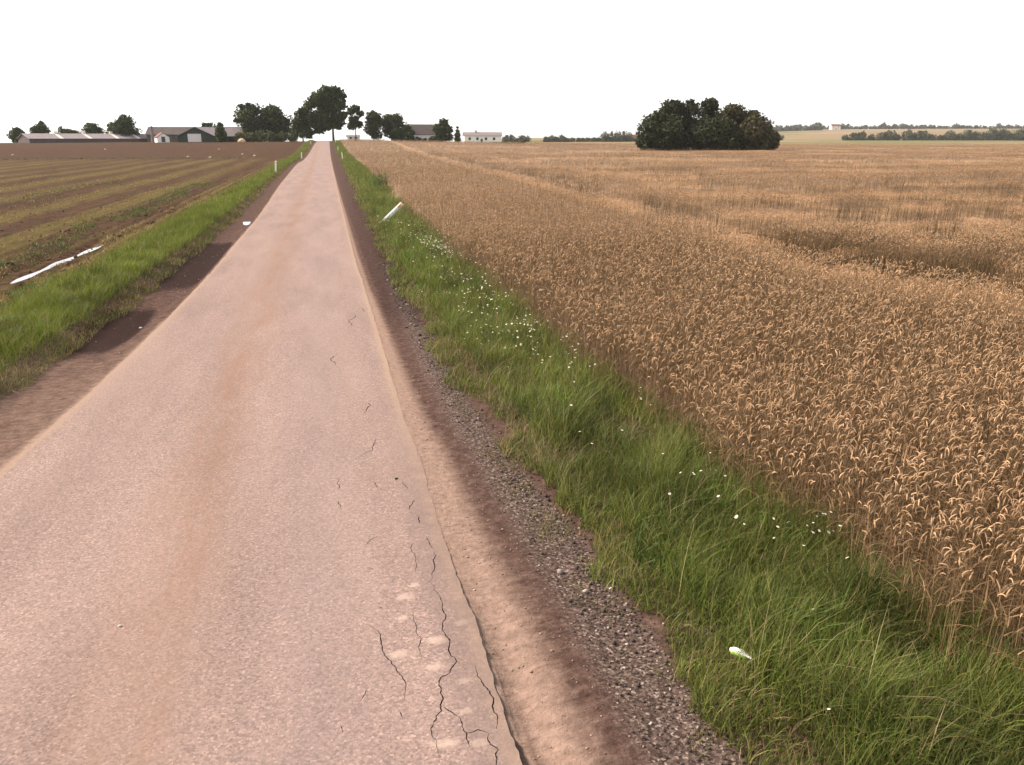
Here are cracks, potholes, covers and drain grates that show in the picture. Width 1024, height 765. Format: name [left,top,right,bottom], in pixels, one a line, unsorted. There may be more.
crack [375,481,499,765]
